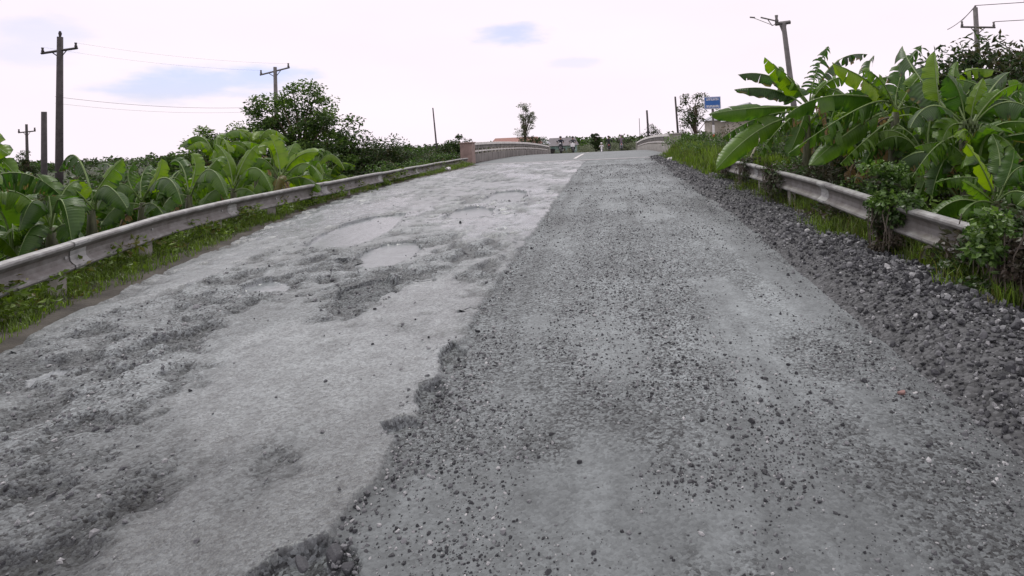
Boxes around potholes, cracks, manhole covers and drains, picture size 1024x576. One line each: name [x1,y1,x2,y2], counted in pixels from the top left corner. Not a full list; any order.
pothole [476,189,530,202]
pothole [439,205,499,220]
pothole [344,239,430,270]
pothole [320,273,408,314]
pothole [295,211,408,252]
